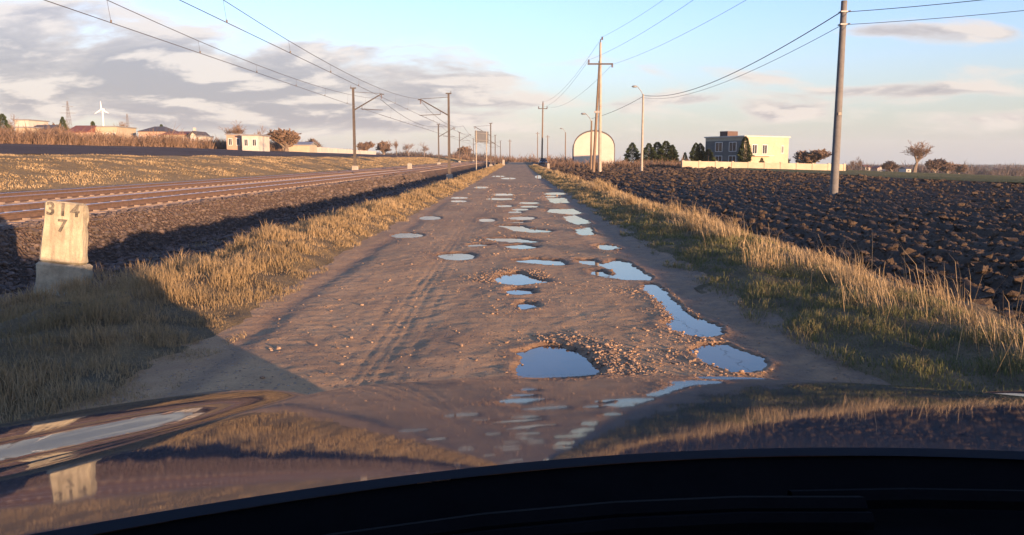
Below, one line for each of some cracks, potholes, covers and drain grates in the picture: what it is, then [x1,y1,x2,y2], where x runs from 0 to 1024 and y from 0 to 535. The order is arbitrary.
pothole [430,251,479,260]
pothole [490,270,555,285]
pothole [684,341,779,373]
pothole [571,226,601,235]
pothole [509,299,542,310]
pothole [558,214,594,225]
pothole [571,257,656,281]
pothole [508,257,573,265]
pothole [509,341,609,376]
pothole [499,286,540,295]
pothole [491,224,557,233]
pothole [635,281,730,338]
